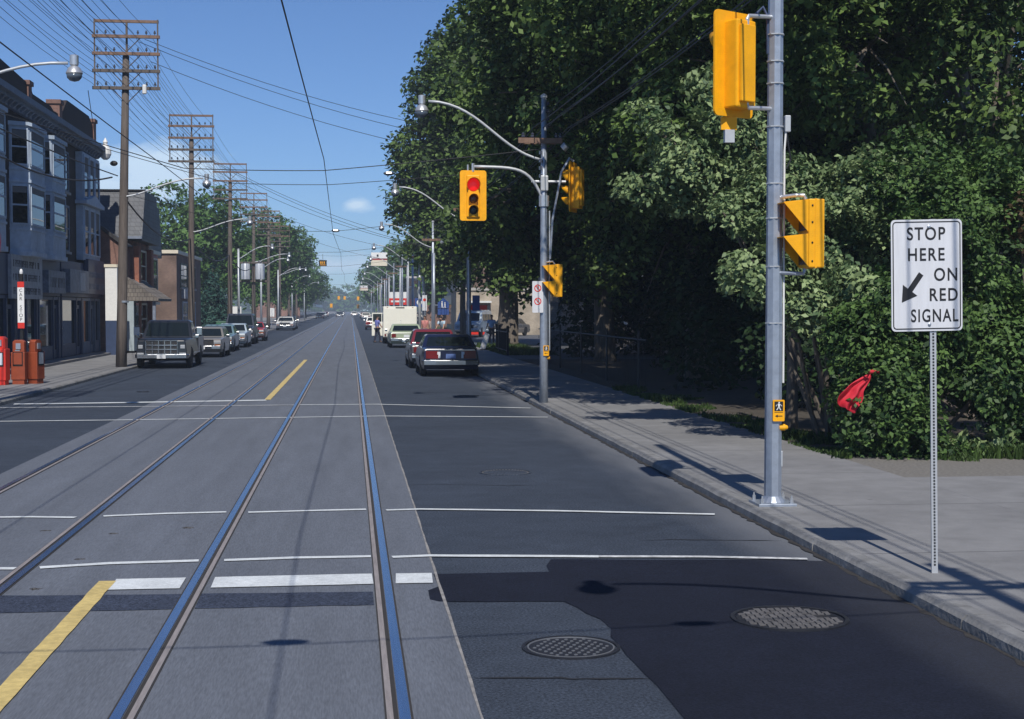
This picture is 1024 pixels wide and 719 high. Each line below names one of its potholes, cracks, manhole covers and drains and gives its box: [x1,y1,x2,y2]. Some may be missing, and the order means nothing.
manhole cover [730,605,850,632]
manhole cover [521,635,620,660]
